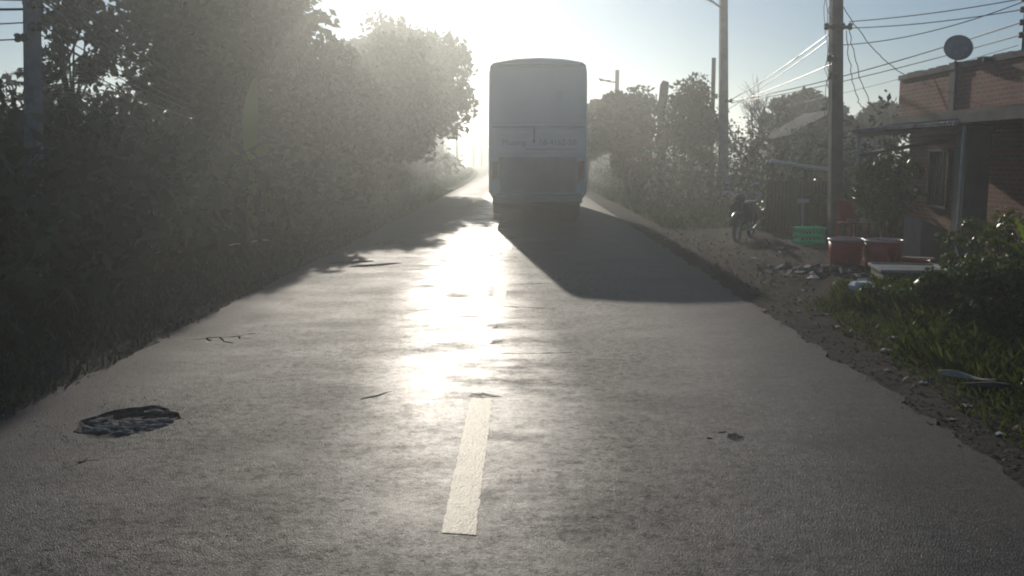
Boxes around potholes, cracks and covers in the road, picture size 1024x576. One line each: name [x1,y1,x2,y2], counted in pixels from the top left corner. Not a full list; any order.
crack [195,333,255,343]
pothole [726,433,744,442]
pothole [73,405,181,439]
